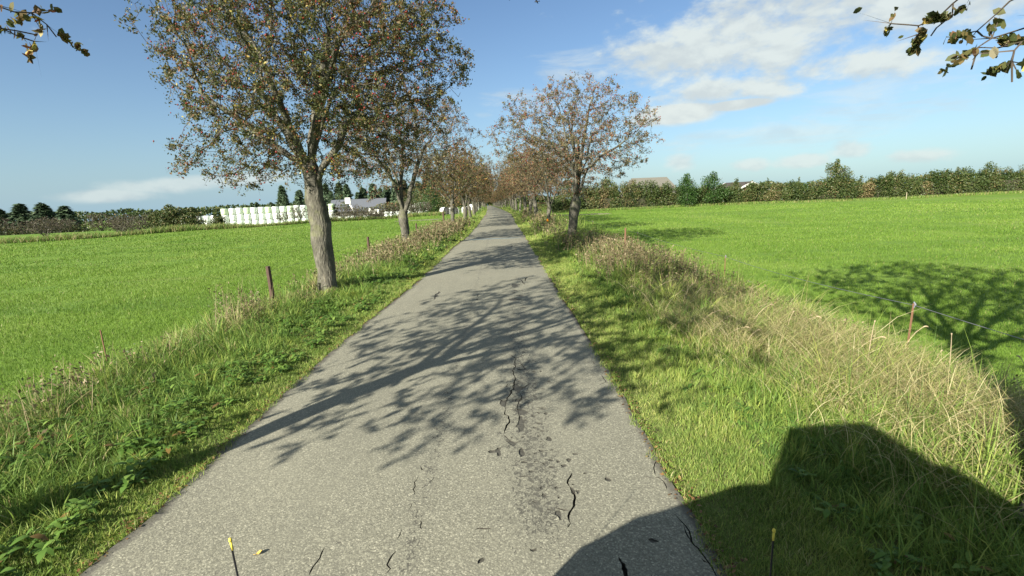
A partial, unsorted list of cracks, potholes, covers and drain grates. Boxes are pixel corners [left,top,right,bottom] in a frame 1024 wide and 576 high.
crack [677,517,717,576]
crack [386,391,448,571]
crack [494,354,587,528]
